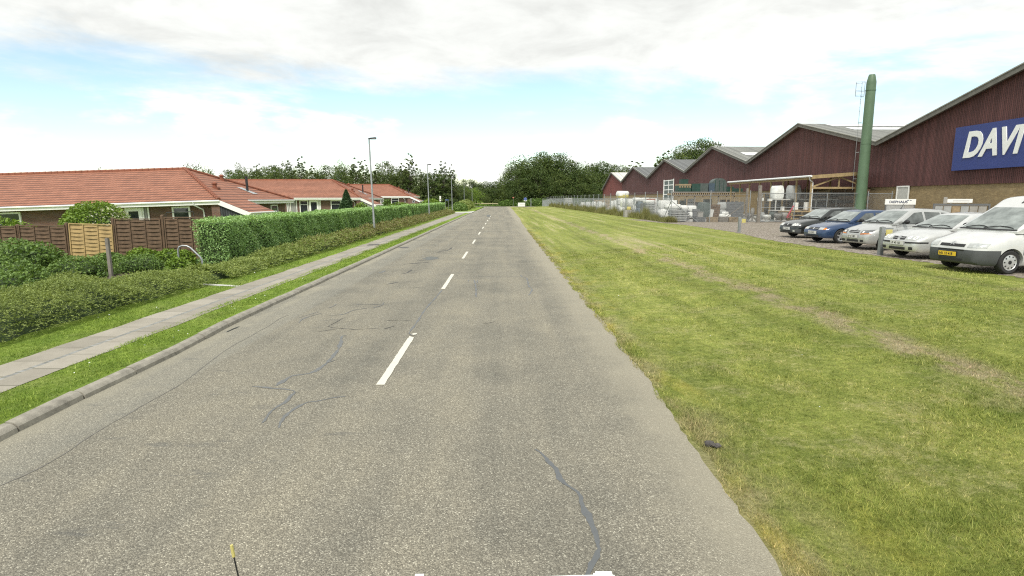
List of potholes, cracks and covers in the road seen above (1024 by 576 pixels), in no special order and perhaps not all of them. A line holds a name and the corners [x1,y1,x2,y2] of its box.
crack [299,247,452,335]
